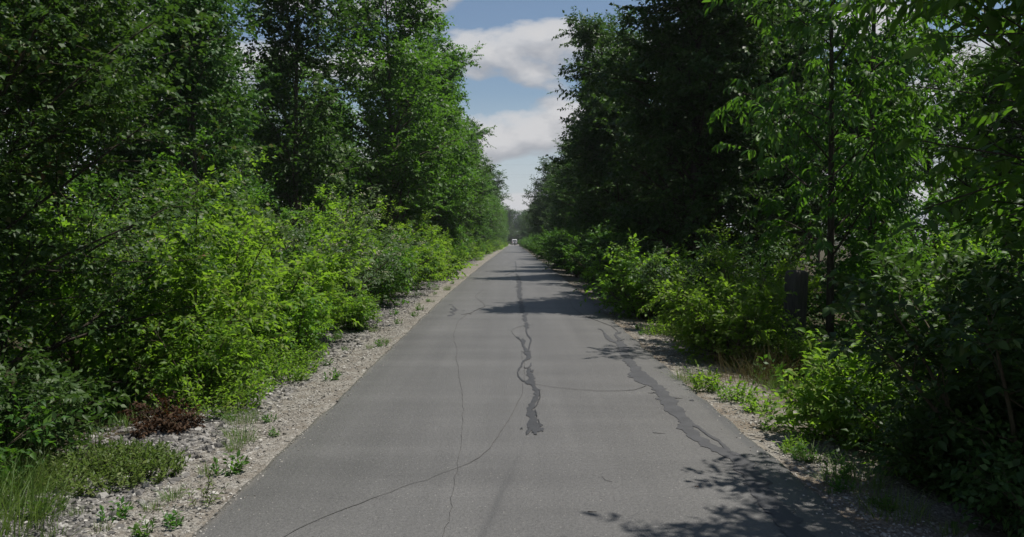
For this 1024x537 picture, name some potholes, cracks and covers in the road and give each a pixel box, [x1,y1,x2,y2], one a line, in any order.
crack [283,291,523,537]
